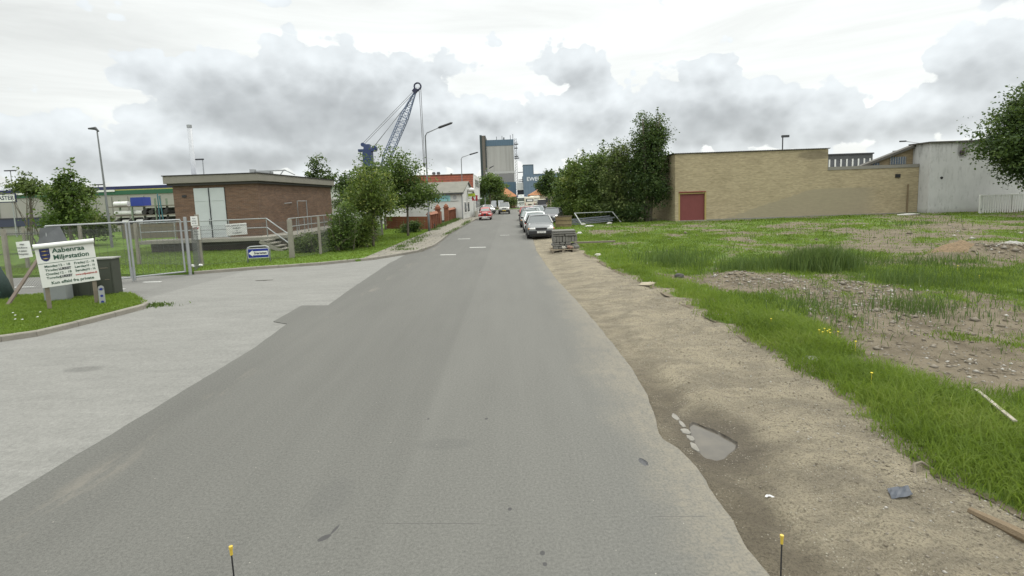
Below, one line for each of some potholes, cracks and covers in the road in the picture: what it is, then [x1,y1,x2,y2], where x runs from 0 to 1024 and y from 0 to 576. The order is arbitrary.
pothole [689,422,738,461]
